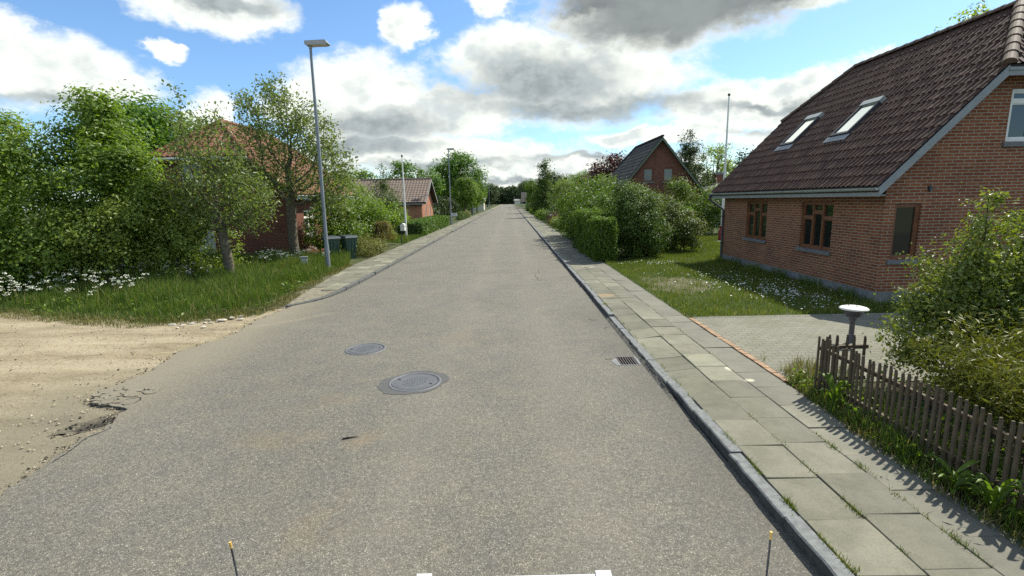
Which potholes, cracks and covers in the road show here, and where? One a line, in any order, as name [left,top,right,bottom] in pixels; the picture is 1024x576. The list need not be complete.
drain grate [612,356,641,365]
pothole [46,412,121,438]
manhole cover [377,371,449,395]
manhole cover [345,343,386,355]
